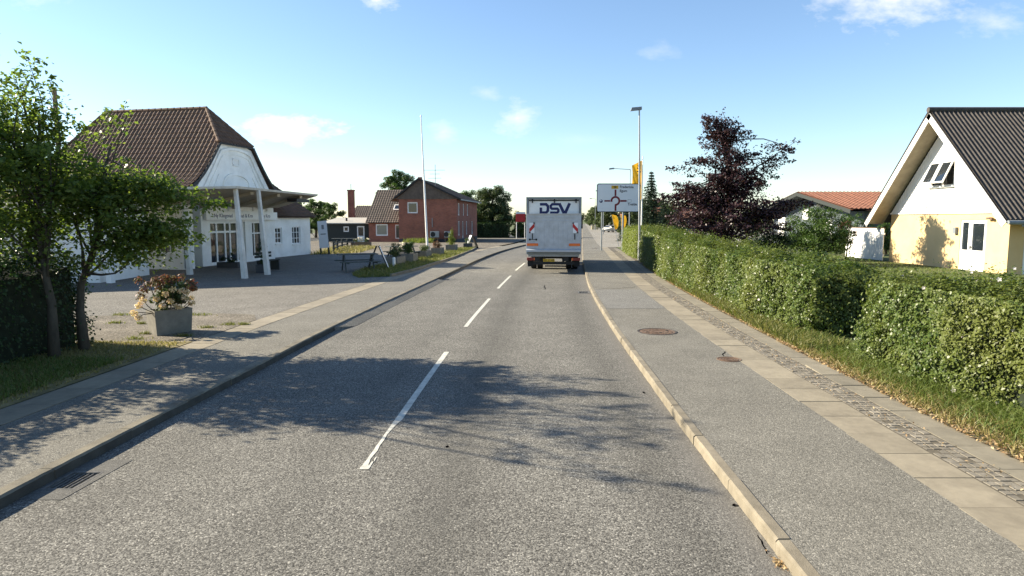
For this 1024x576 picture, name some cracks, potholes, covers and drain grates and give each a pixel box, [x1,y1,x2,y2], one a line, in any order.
drain grate [41,471,105,489]
